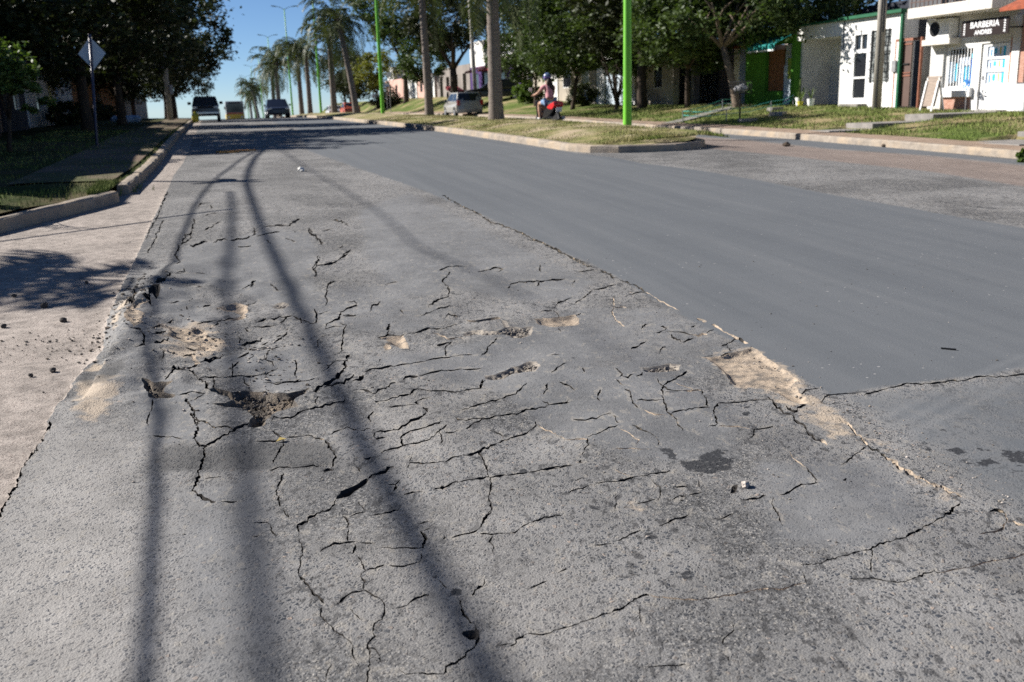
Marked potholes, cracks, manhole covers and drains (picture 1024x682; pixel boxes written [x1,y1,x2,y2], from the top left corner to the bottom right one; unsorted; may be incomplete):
pothole [702,347,810,404]
pothole [643,363,681,372]
pothole [380,335,409,351]
pothole [535,314,579,327]
pothole [463,320,533,338]
pothole [141,377,175,398]
crack [124,192,1024,682]
pothole [209,388,309,428]
pothole [484,361,540,380]
